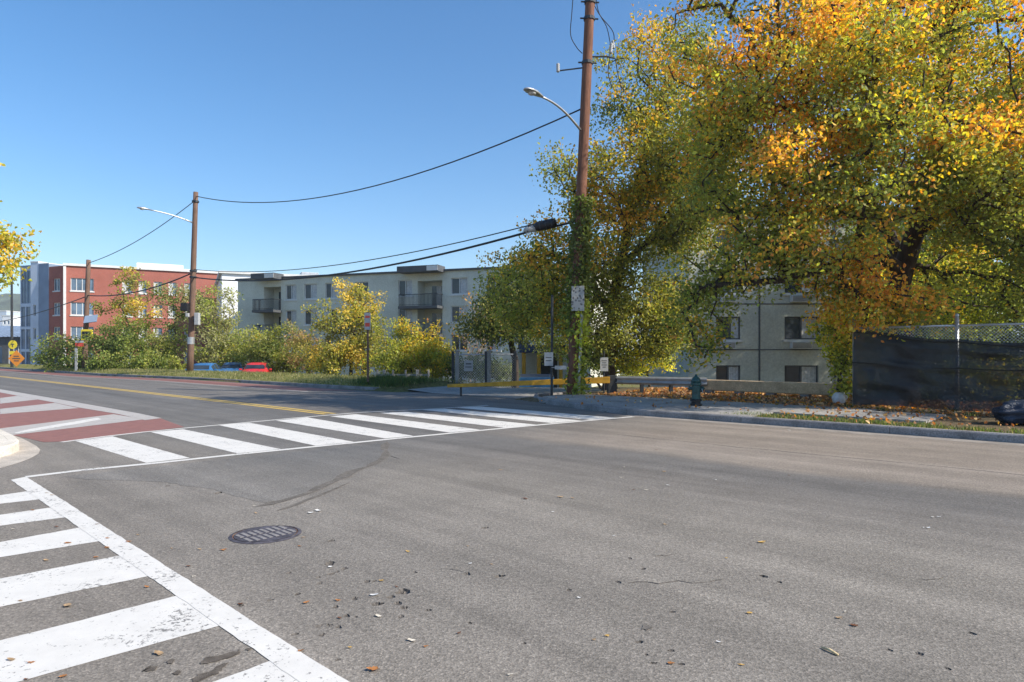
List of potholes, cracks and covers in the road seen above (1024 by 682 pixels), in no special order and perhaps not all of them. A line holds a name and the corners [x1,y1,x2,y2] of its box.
manhole cover [228,525,302,544]
